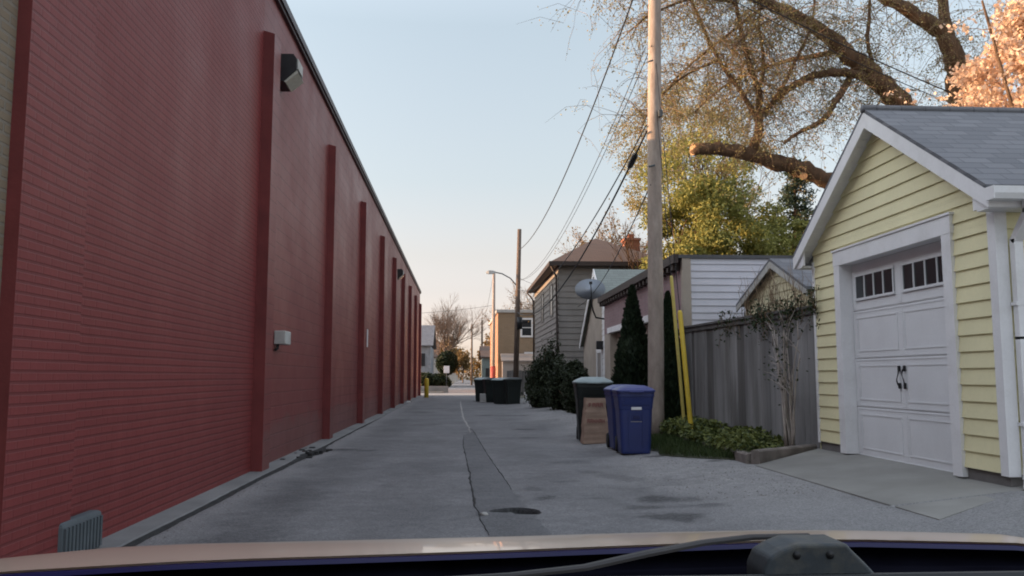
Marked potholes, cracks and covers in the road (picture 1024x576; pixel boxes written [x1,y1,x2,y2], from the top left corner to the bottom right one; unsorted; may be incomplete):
crack [460,402,512,535]
pothole [475,506,554,520]
